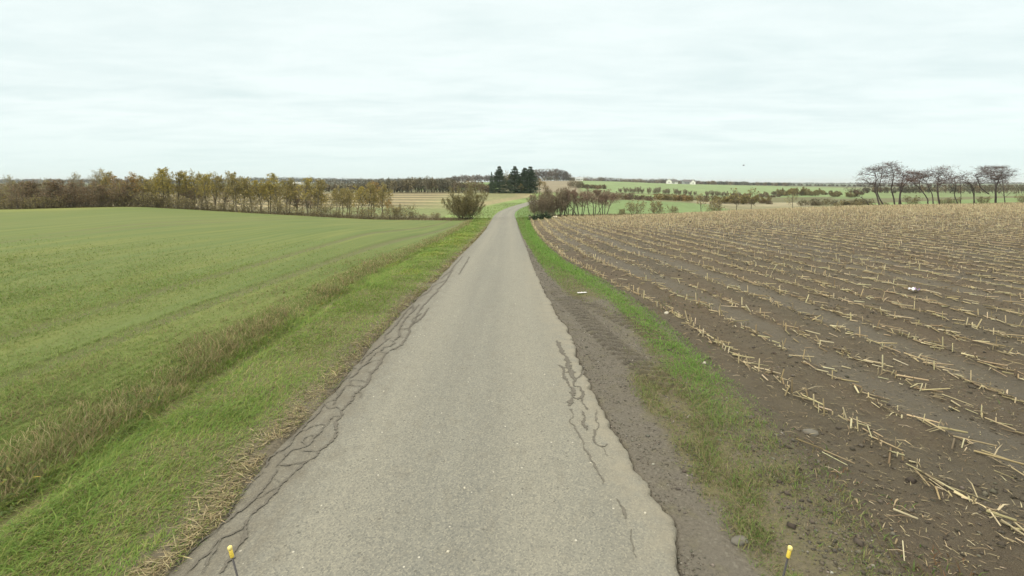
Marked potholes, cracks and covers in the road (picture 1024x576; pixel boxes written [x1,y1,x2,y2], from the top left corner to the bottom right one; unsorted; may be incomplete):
crack [168,257,470,573]
crack [556,340,637,557]
